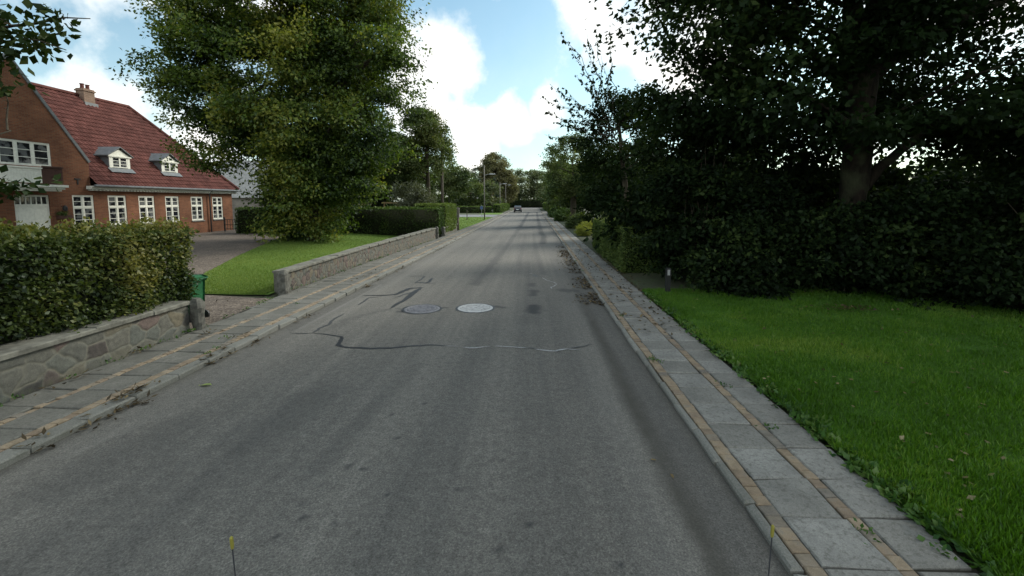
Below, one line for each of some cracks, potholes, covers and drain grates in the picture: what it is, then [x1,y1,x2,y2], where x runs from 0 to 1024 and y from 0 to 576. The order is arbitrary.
manhole cover [401,304,443,314]
manhole cover [455,303,495,313]
